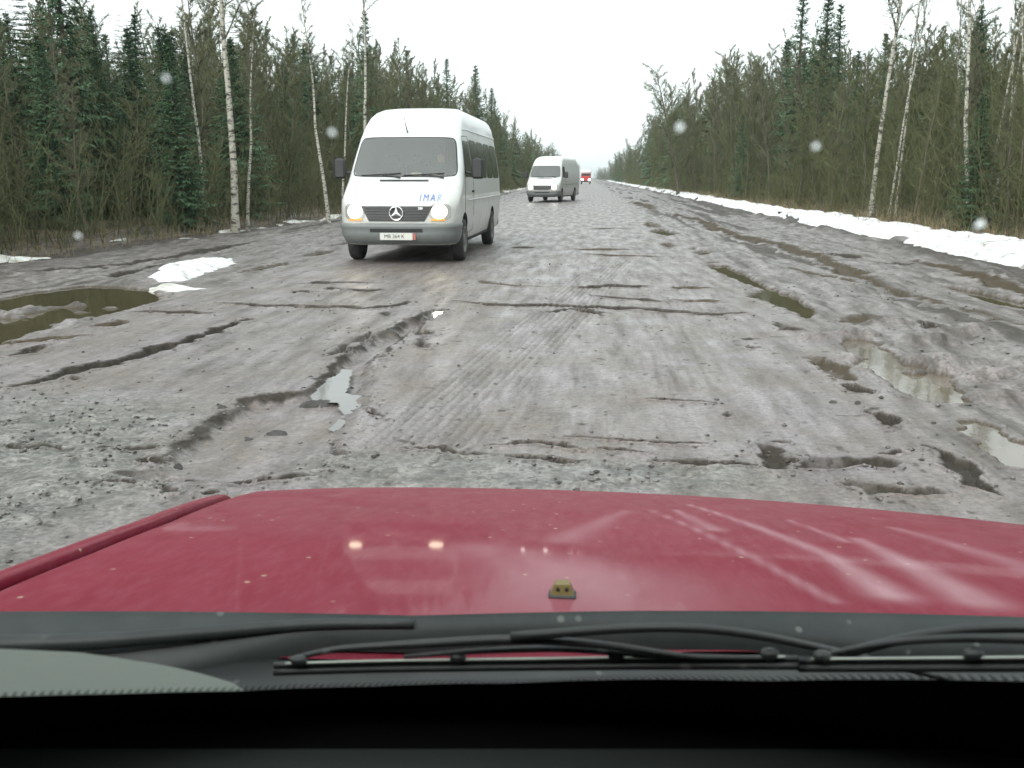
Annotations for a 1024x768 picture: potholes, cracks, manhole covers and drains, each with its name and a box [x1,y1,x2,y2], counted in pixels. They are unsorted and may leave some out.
crack [1,281,415,357]
pothole [829,325,989,407]
crack [444,201,1024,351]
crack [393,434,796,469]
pothole [831,479,953,499]
pothole [108,307,445,490]
pothole [700,263,833,321]
pothole [940,416,1024,471]
pothole [740,441,804,473]
pothole [791,454,907,472]
pothole [0,284,171,348]
